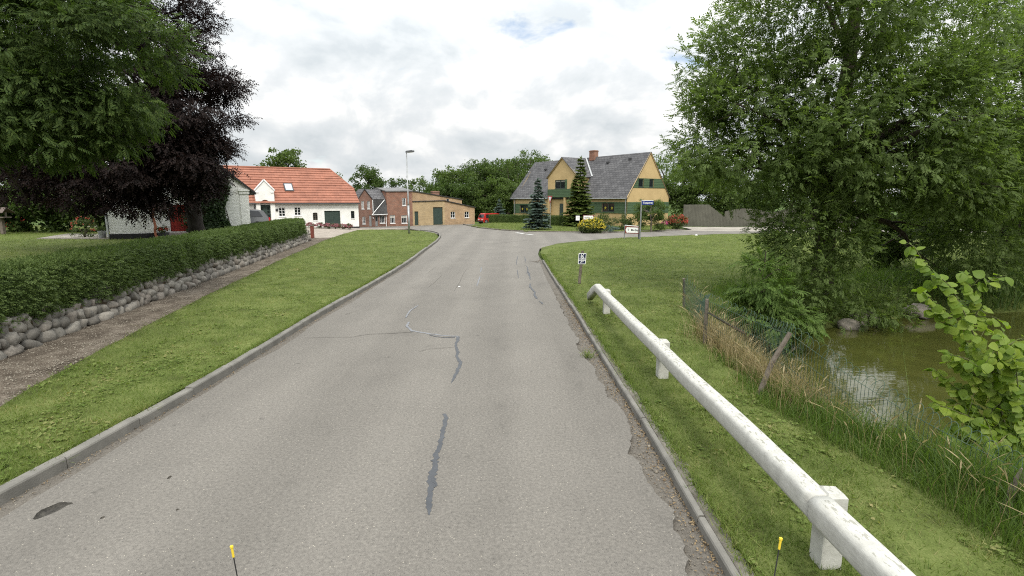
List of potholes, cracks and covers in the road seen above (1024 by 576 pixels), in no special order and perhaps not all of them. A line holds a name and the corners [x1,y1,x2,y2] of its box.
crack [516,256,543,304]
